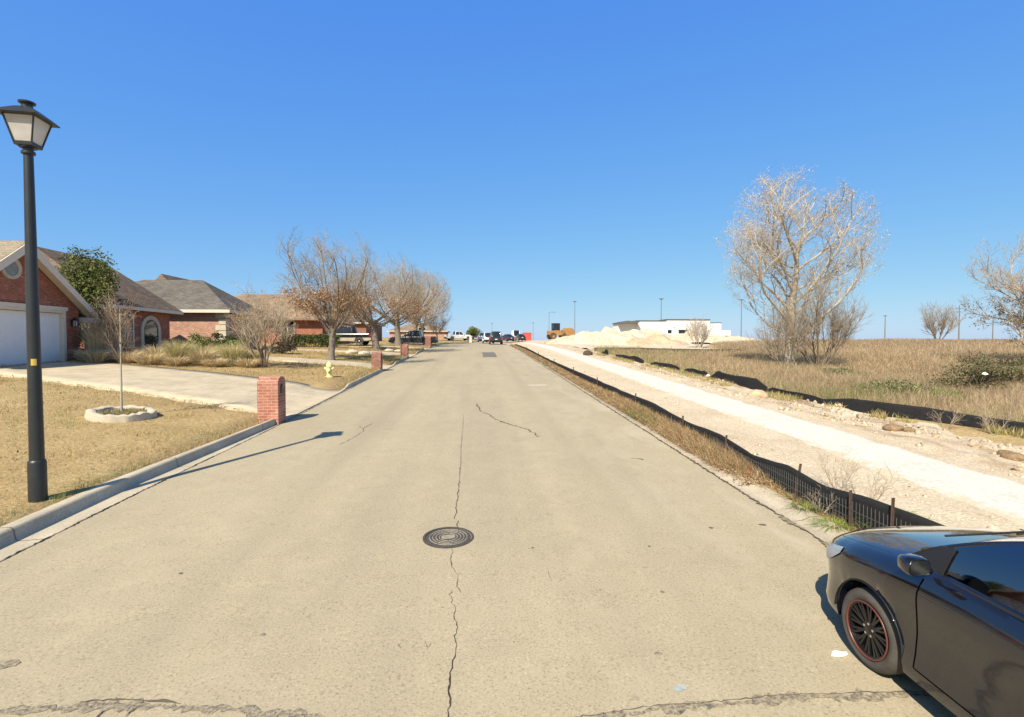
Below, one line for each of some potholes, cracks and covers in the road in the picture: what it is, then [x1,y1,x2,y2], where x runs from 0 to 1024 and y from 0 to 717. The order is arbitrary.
crack [454,404,538,527]
crack [80,698,177,717]
manhole cover [423,527,474,549]
